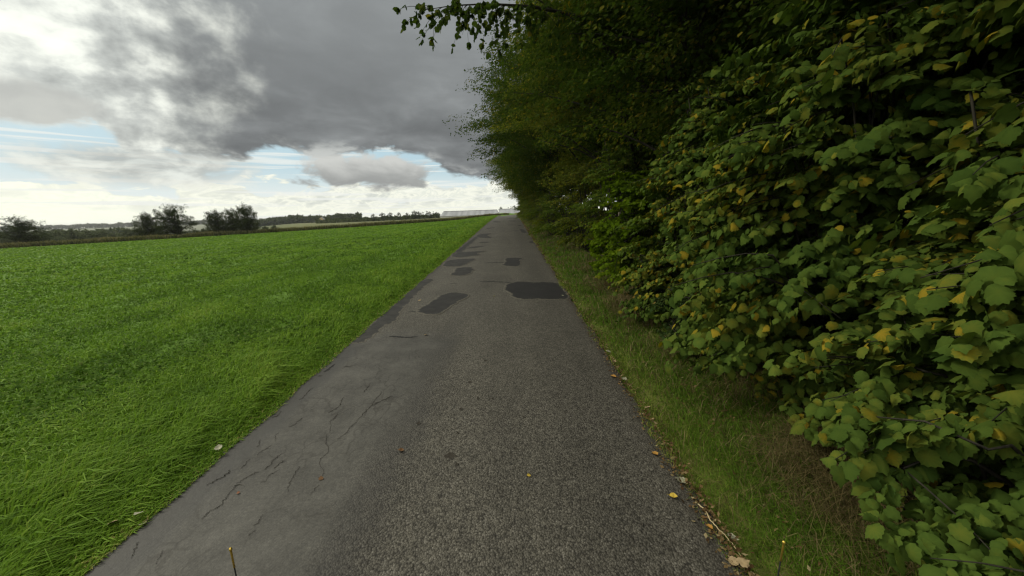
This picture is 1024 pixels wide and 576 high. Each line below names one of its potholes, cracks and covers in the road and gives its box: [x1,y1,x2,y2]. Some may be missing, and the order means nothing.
crack [314,389,389,490]
crack [205,414,302,515]
